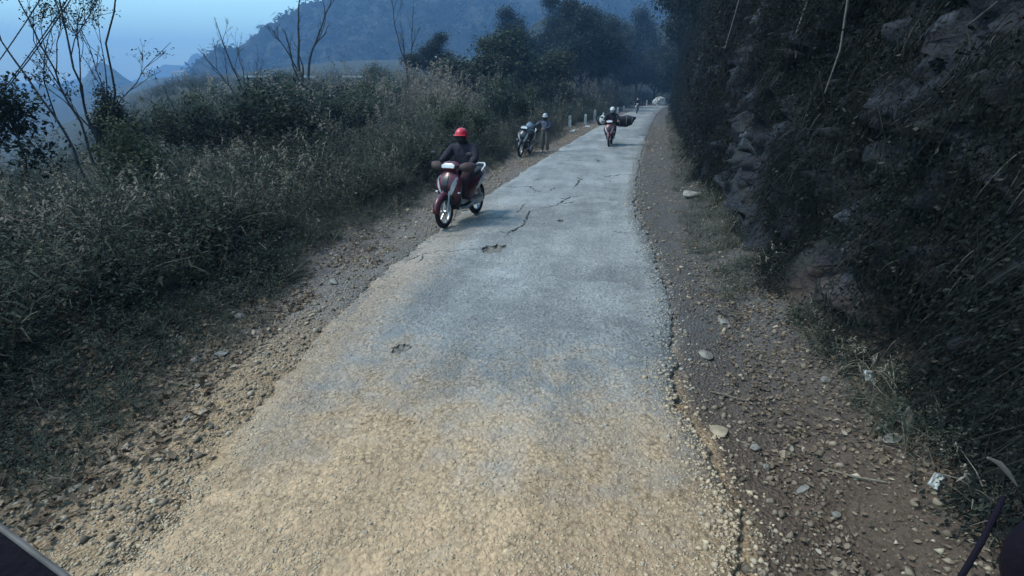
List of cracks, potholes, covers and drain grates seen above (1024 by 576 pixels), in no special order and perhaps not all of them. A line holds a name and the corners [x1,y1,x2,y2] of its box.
pothole [390,344,412,354]
crack [407,154,621,263]
pothole [481,244,507,254]
